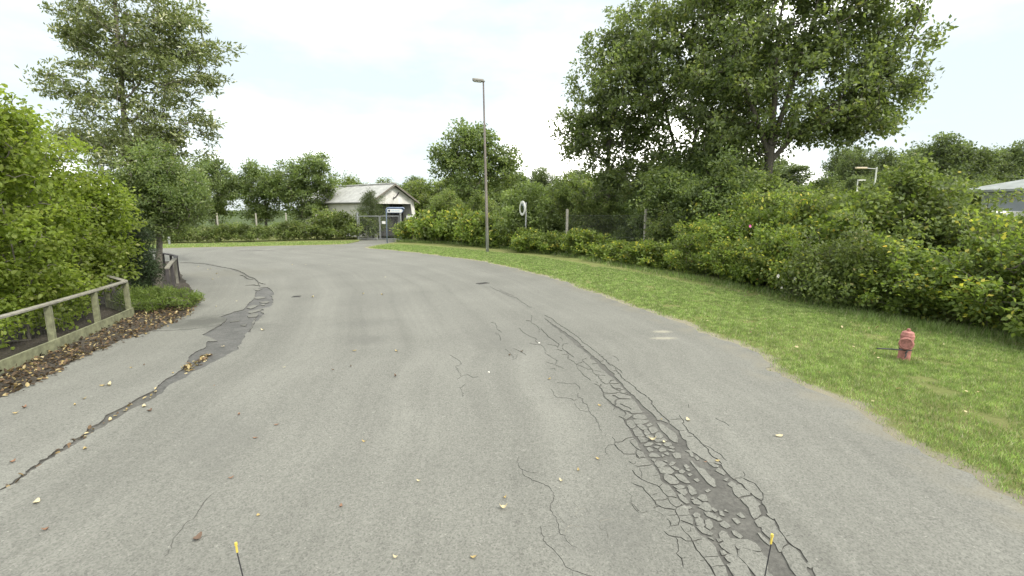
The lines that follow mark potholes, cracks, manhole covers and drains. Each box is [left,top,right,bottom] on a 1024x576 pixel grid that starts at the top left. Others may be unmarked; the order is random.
crack [491,315,816,576]
crack [164,495,211,557]
